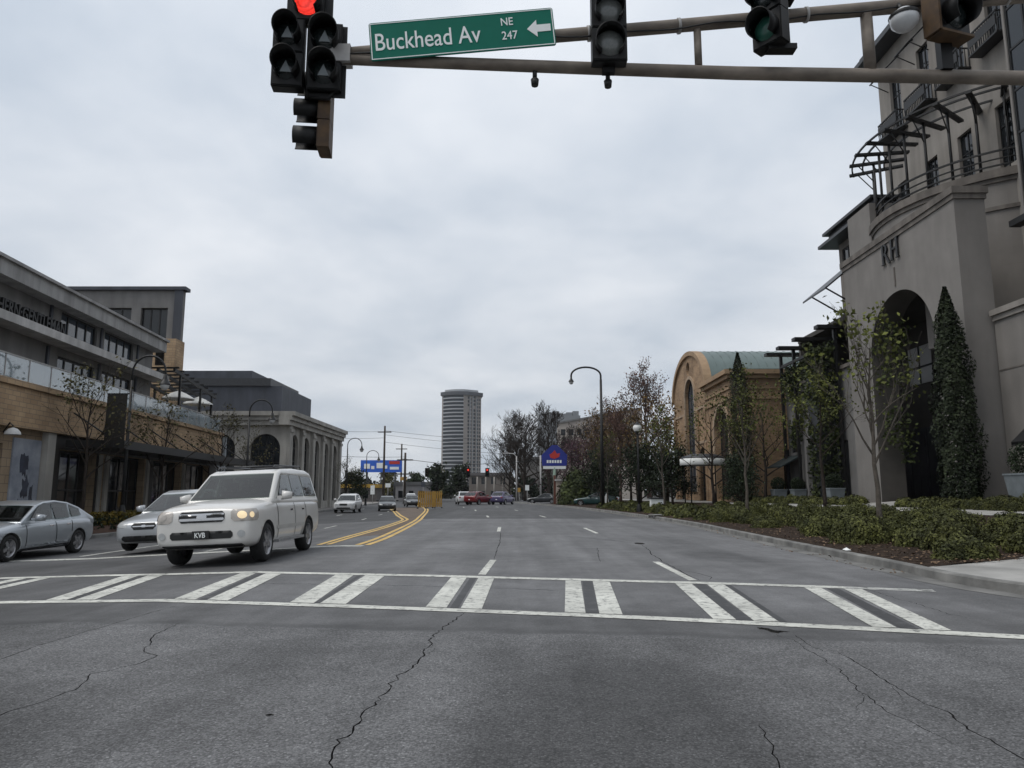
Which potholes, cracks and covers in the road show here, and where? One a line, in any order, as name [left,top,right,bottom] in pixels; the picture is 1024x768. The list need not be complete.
crack [328,613,464,768]
crack [1,607,182,715]
crack [759,725,780,768]
crack [578,537,771,580]
crack [776,634,1024,760]
